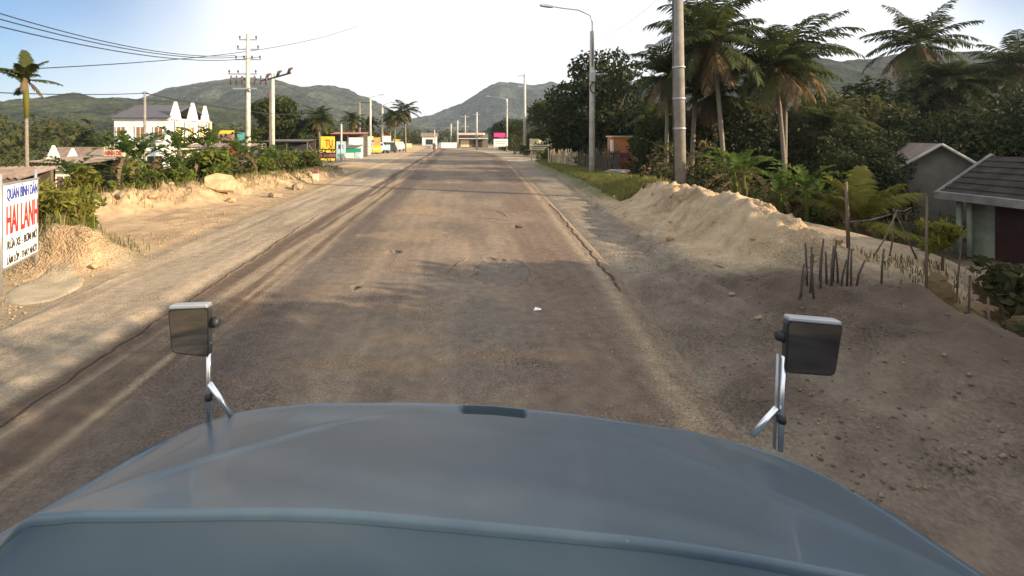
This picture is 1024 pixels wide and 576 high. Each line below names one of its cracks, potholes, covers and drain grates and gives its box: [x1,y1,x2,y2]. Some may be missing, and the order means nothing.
pothole [344,281,372,295]
pothole [378,248,409,258]
crack [448,257,469,272]
pothole [507,223,526,231]
crack [545,204,626,291]
